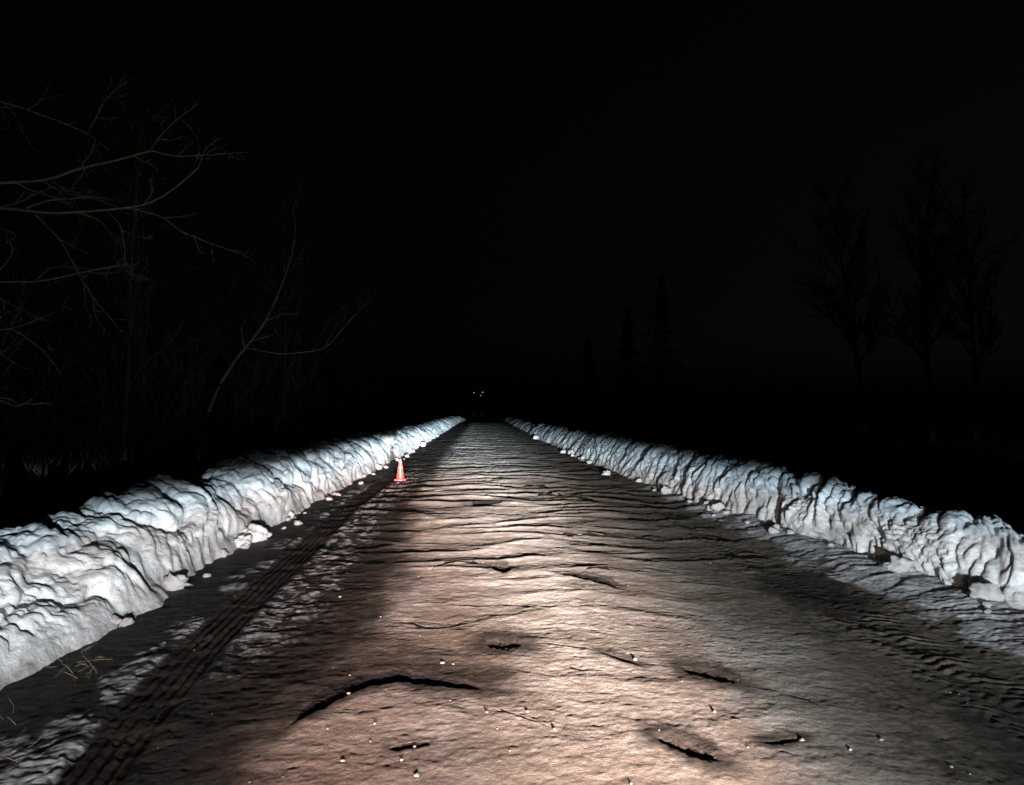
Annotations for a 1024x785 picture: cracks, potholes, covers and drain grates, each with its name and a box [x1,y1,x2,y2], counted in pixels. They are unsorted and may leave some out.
crack [383,602,550,630]
pothole [480,634,524,651]
crack [643,663,831,711]
pothole [647,729,728,766]
